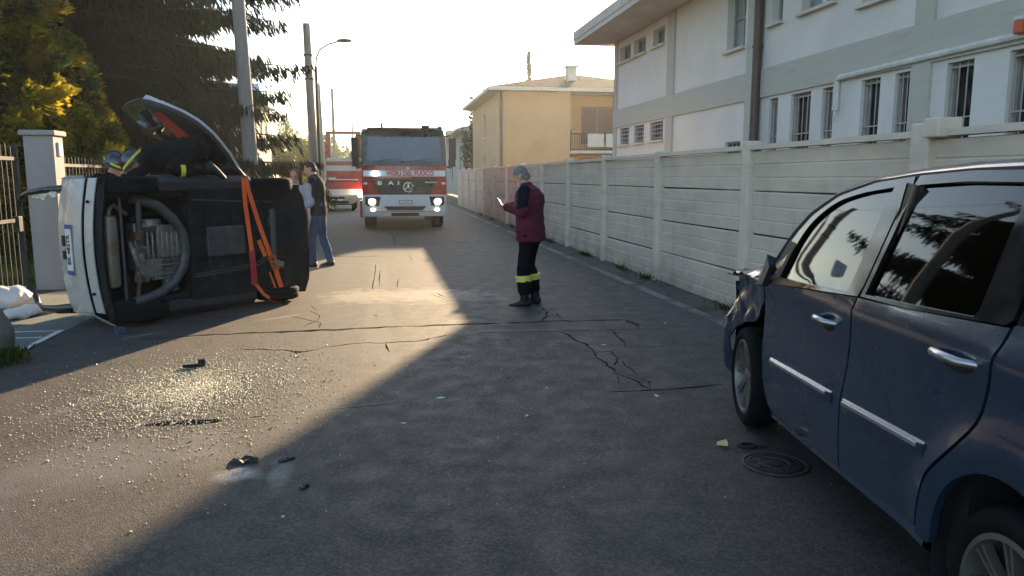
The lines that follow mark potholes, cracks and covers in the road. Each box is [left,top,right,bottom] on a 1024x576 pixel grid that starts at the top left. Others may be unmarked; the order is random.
crack [139,305,722,392]
manhole cover [741,451,809,476]
